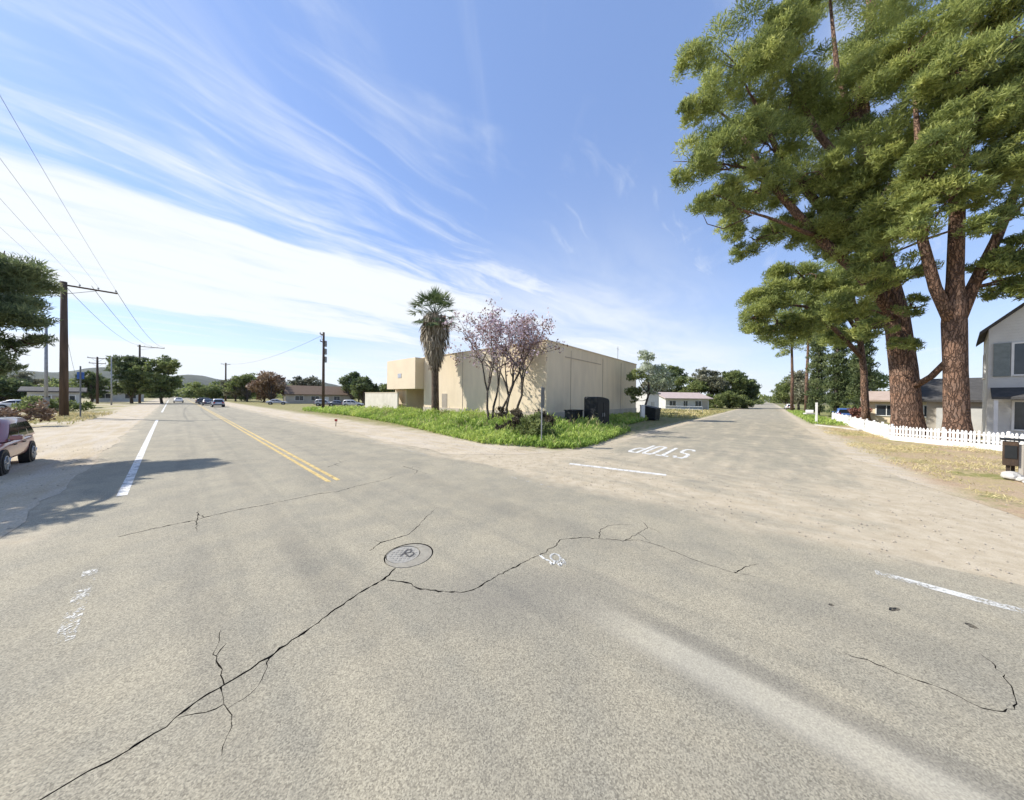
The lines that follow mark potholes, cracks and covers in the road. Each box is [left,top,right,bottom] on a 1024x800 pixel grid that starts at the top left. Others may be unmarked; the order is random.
manhole cover [384,543,433,568]
crack [846,653,1017,712]
crack [119,477,391,537]
crack [39,523,756,800]
